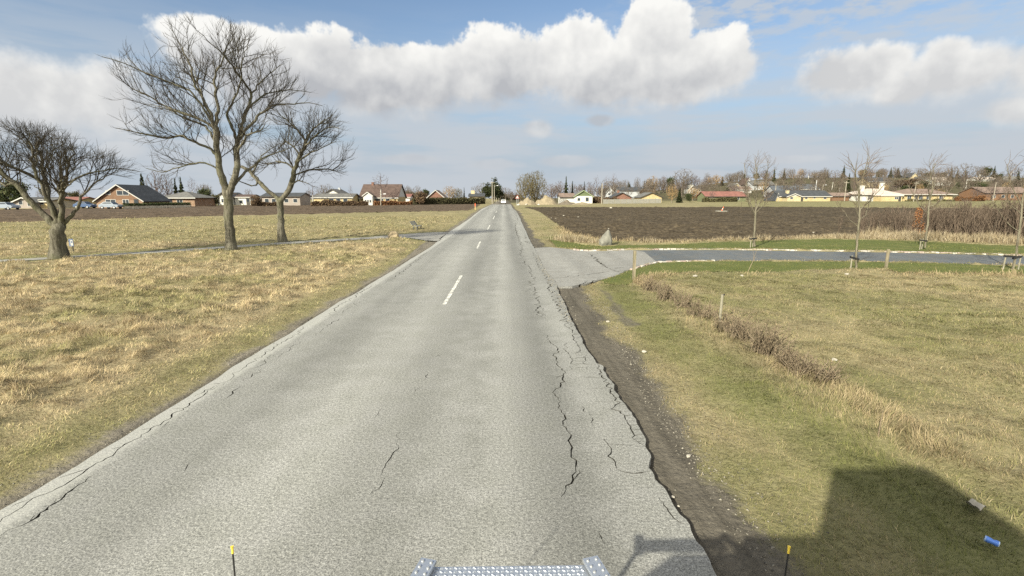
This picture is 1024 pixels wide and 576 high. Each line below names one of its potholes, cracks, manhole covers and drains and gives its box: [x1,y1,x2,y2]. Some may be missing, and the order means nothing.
crack [0,253,426,534]
crack [515,218,650,497]
